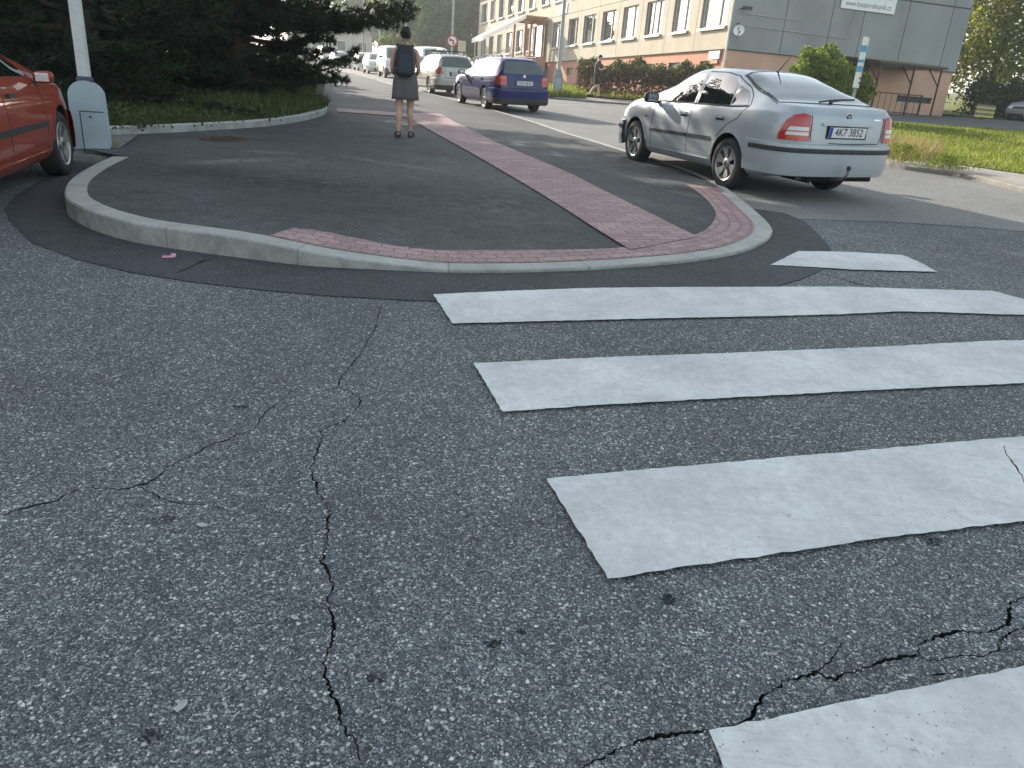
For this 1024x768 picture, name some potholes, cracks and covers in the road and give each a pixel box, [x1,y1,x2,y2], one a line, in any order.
crack [0,393,289,517]
crack [309,308,381,761]
crack [582,597,1024,768]
